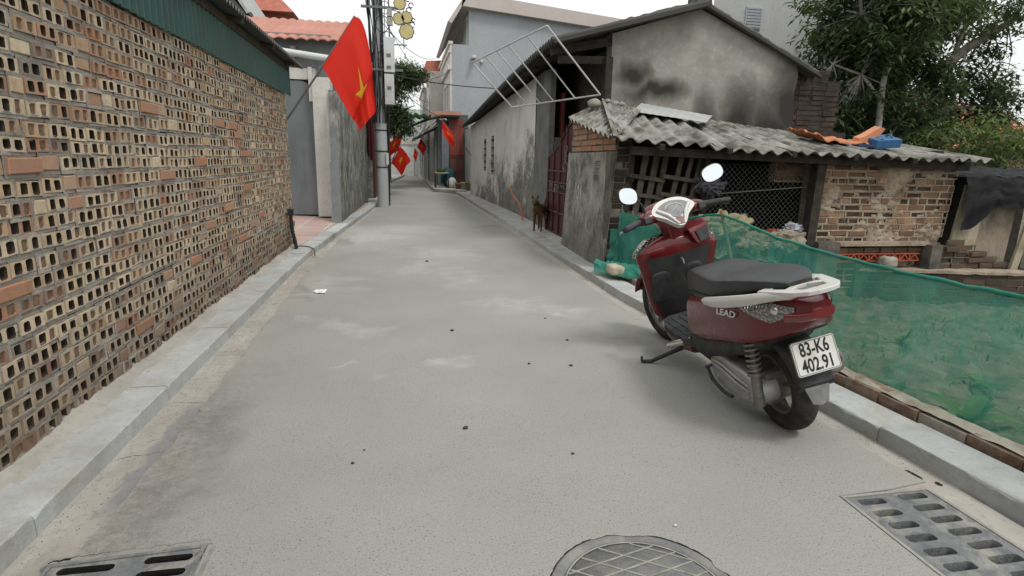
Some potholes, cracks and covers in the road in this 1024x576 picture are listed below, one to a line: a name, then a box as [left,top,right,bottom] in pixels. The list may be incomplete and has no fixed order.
manhole cover [552,535,728,576]
